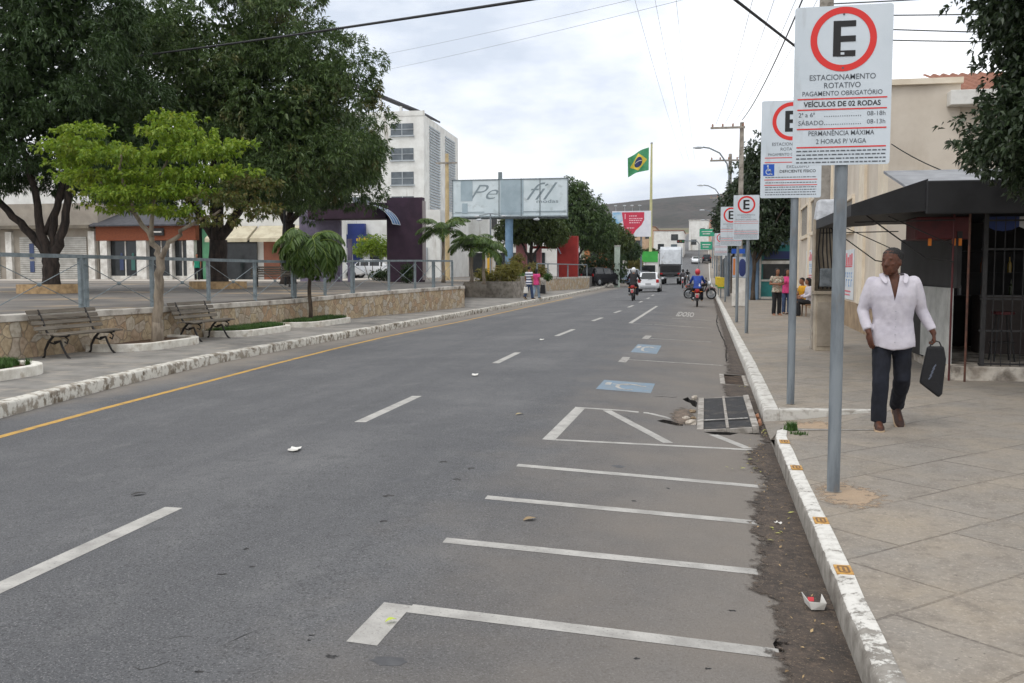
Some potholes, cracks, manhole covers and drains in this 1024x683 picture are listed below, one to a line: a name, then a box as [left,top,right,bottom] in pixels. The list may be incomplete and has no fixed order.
drain grate [697,395,759,434]
drain grate [719,374,748,386]
